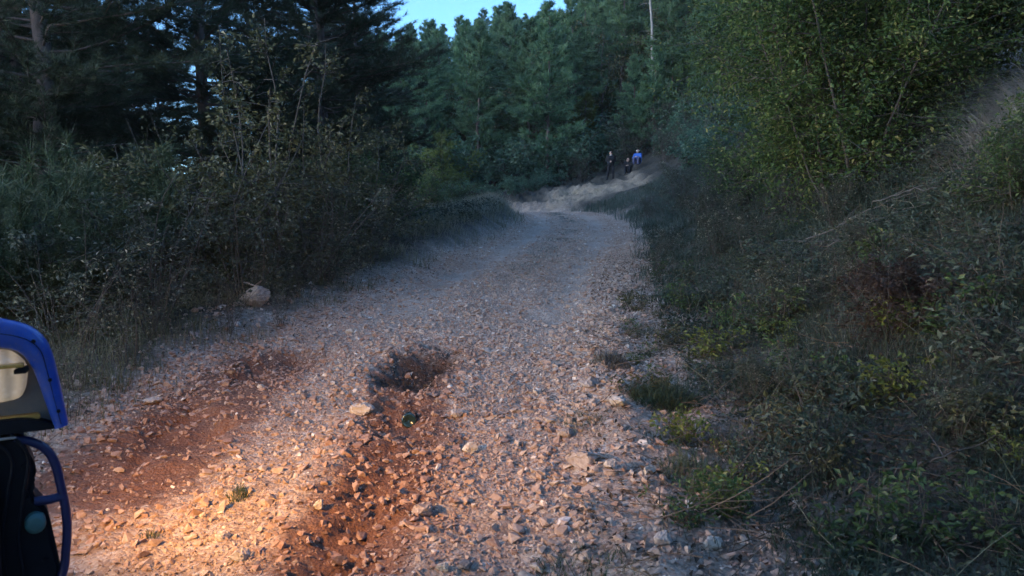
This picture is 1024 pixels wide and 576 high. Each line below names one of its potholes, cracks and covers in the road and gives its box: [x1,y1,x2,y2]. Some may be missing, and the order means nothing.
pothole [360,342,479,397]
